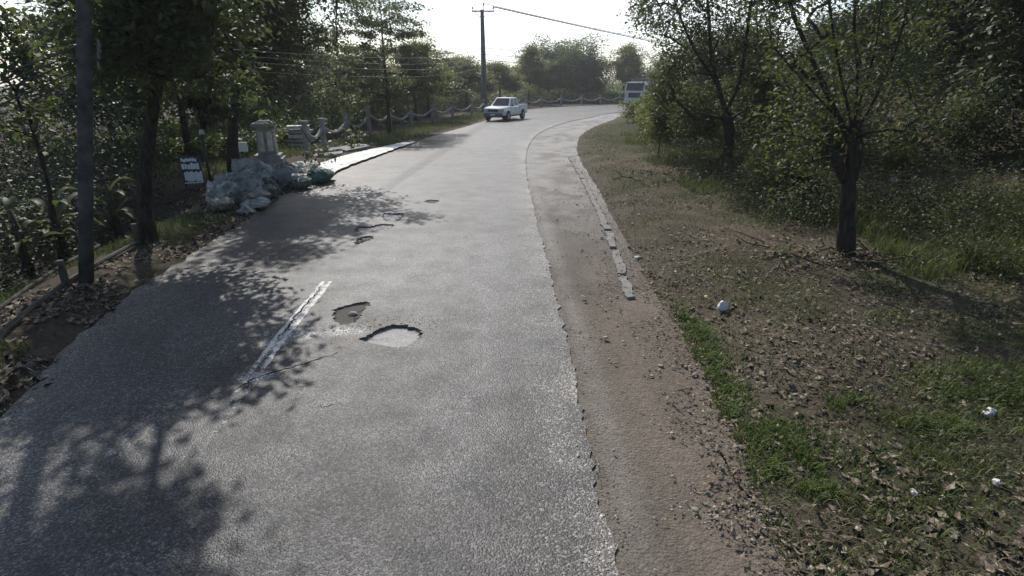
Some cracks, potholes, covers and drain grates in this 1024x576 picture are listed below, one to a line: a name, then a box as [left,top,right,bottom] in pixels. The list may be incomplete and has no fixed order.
pothole [332,301,371,325]
pothole [382,213,404,222]
crack [229,348,346,393]
pothole [354,224,395,234]
pothole [359,325,423,348]
